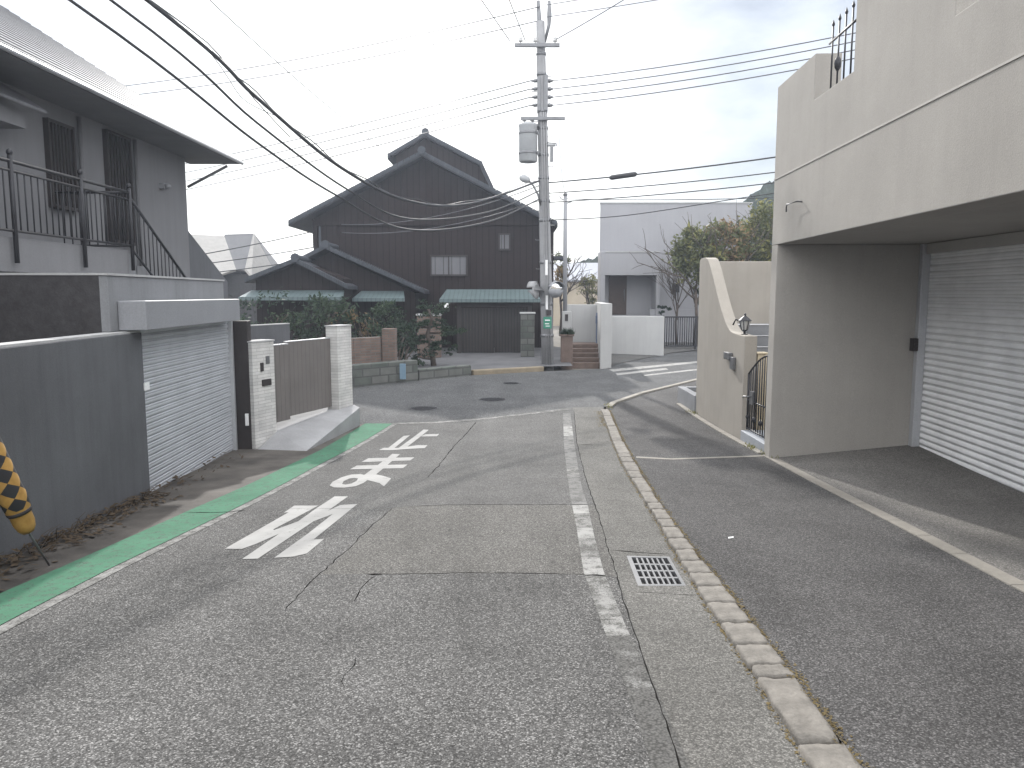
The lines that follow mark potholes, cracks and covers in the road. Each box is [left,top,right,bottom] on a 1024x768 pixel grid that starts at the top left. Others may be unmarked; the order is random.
crack [354,572,600,601]
drain grate [627,556,686,594]
crack [226,505,435,608]
